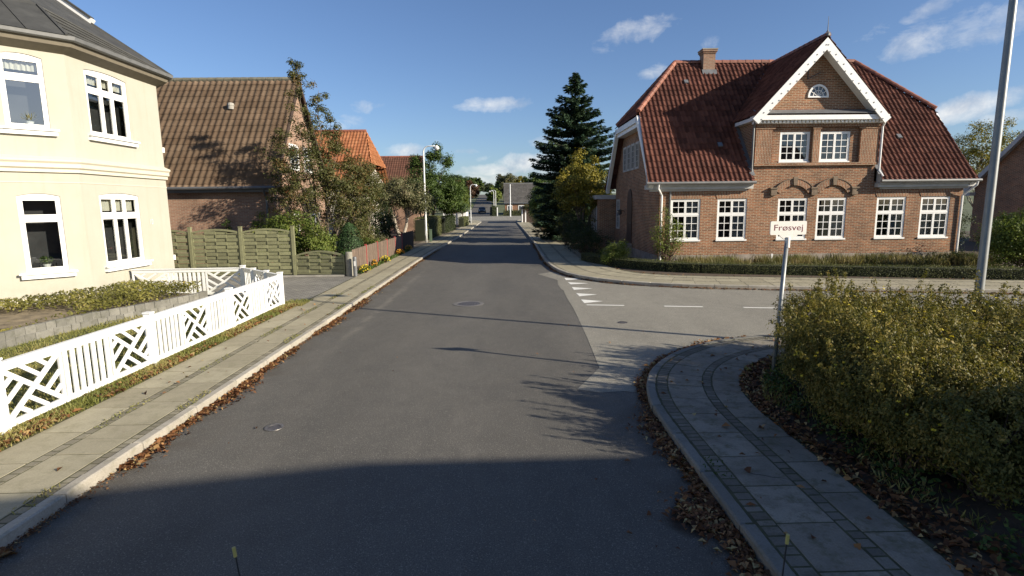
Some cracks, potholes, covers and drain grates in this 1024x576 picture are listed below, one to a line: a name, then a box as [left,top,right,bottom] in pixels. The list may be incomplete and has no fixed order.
utility cover [264,423,284,431]
